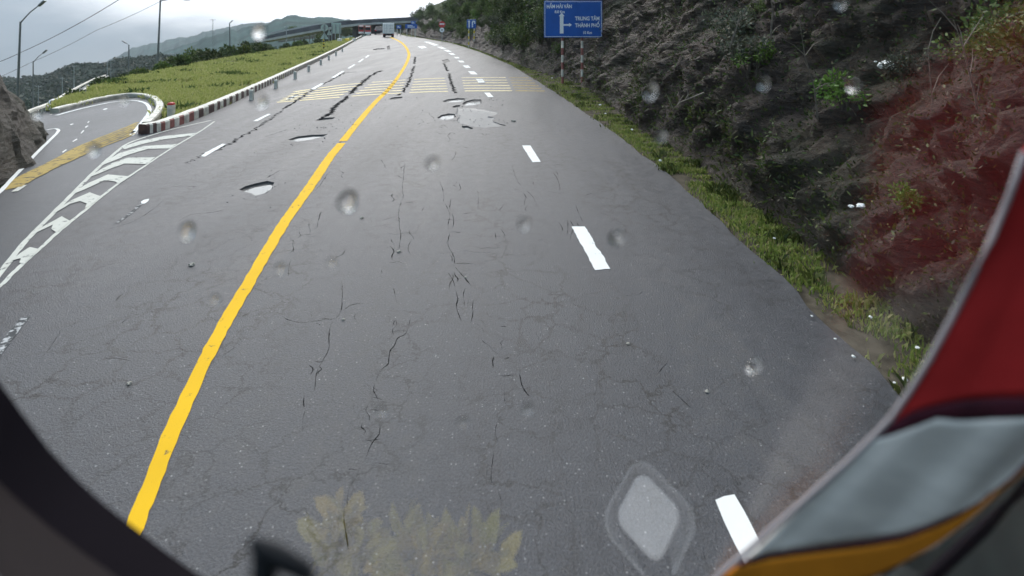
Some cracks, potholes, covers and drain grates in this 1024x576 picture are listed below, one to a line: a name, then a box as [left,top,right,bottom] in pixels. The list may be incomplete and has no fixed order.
crack [214,110,285,152]
crack [343,320,410,551]
crack [381,163,423,271]
crack [285,286,363,429]
pothole [288,134,327,142]
pothole [239,181,274,196]
crack [442,164,588,499]
